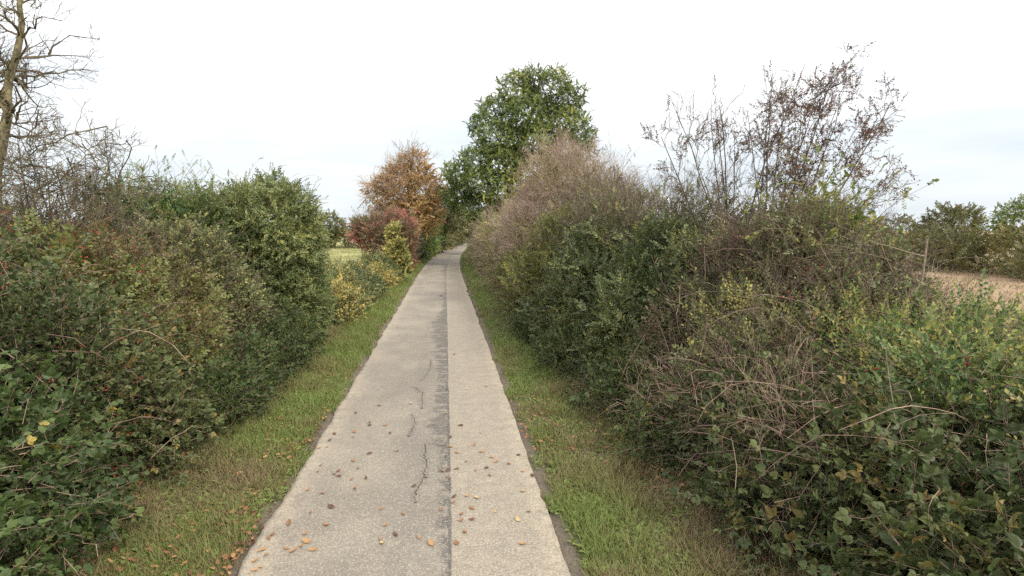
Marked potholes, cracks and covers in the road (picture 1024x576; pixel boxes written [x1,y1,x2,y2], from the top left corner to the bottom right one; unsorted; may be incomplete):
crack [406,359,446,503]
